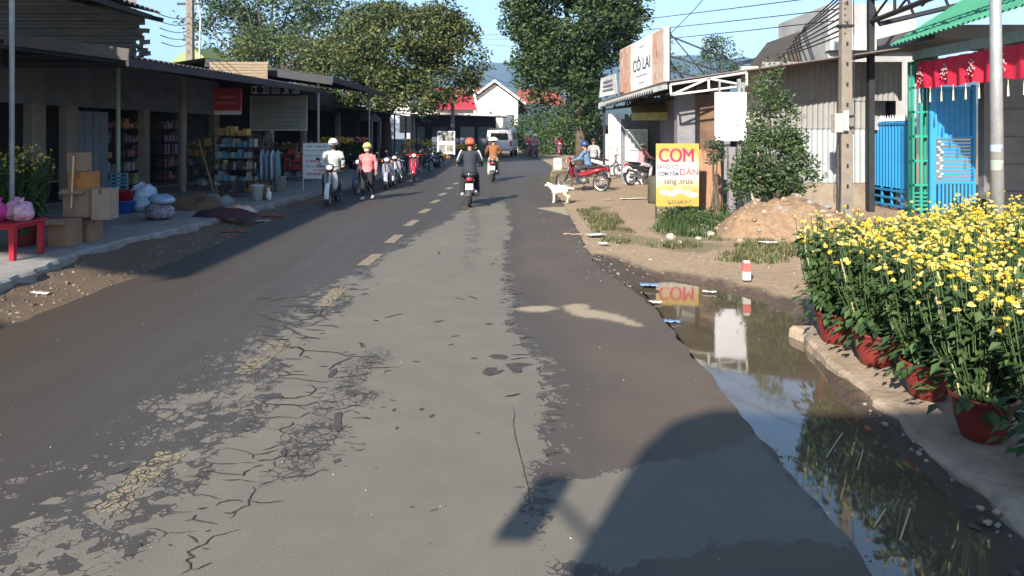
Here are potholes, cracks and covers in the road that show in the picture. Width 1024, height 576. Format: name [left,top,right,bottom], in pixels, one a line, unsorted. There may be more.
pothole [505,362,532,373]
crack [146,250,395,574]
pothole [482,367,504,376]
crack [507,393,563,507]
